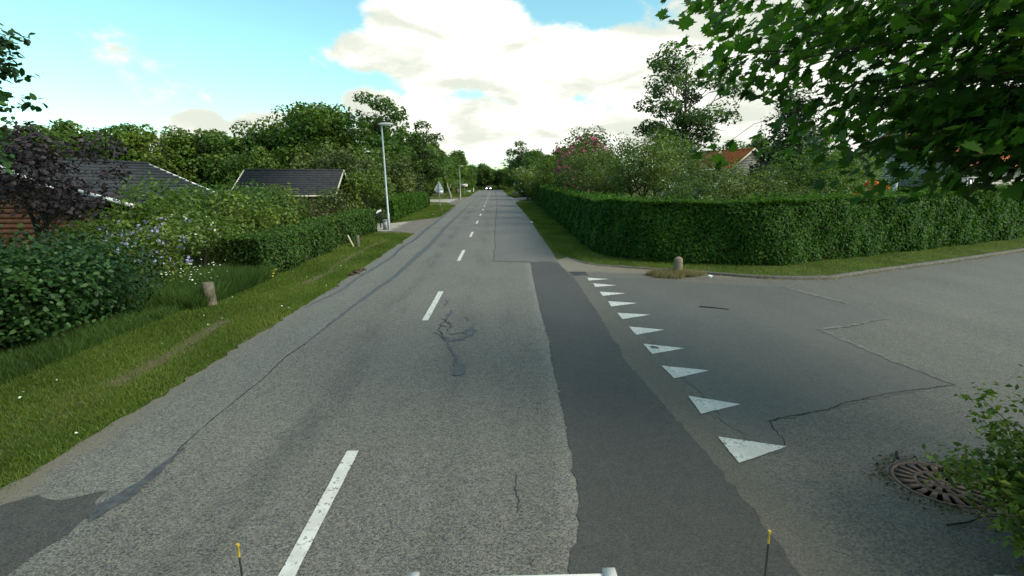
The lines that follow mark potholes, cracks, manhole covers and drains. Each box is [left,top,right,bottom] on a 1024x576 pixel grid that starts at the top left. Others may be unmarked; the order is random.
crack [173,191,497,460]
crack [508,472,520,512]
crack [769,384,954,445]
